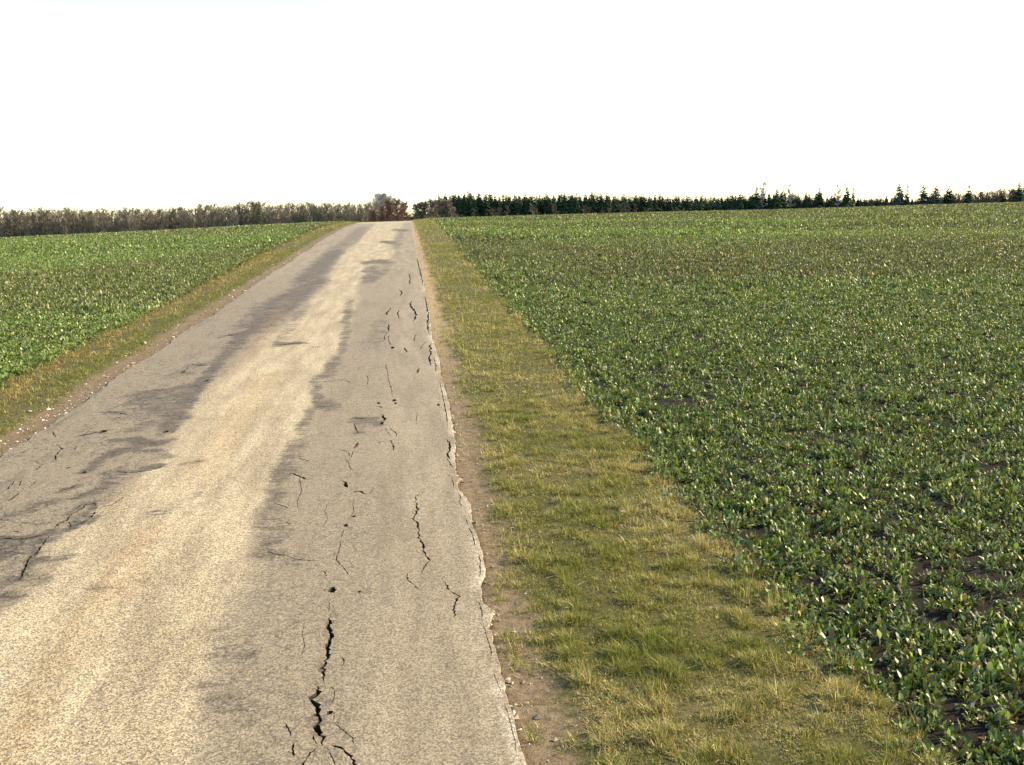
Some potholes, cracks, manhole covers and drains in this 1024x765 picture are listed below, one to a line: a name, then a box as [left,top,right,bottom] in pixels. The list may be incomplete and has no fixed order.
crack [406,493,460,616]
crack [384,259,481,577]
crack [267,364,397,765]
crack [0,432,123,581]
